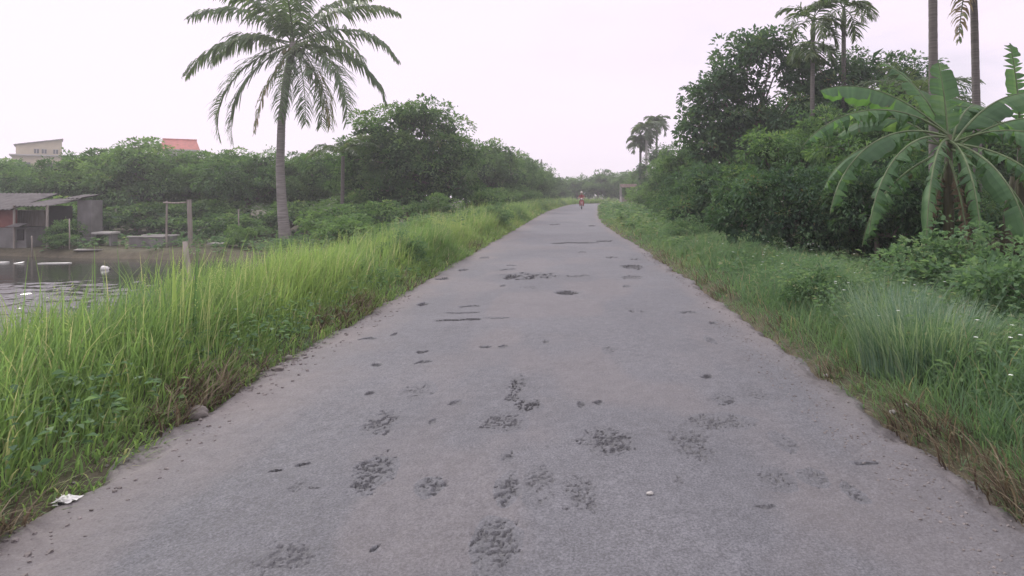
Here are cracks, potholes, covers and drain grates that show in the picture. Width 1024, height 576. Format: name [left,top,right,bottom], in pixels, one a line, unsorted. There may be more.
pothole [505,272,569,280]
